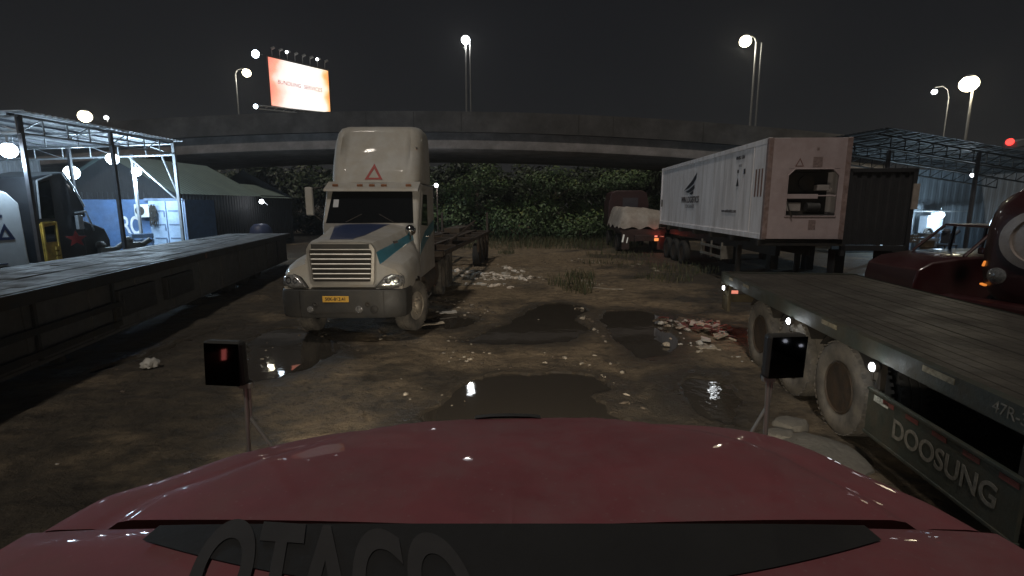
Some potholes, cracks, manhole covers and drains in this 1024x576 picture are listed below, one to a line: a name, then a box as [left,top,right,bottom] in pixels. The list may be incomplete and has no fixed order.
pothole [461,301,597,348]
pothole [411,369,647,423]
pothole [672,374,754,427]
pothole [243,325,348,384]
pothole [594,308,687,360]
